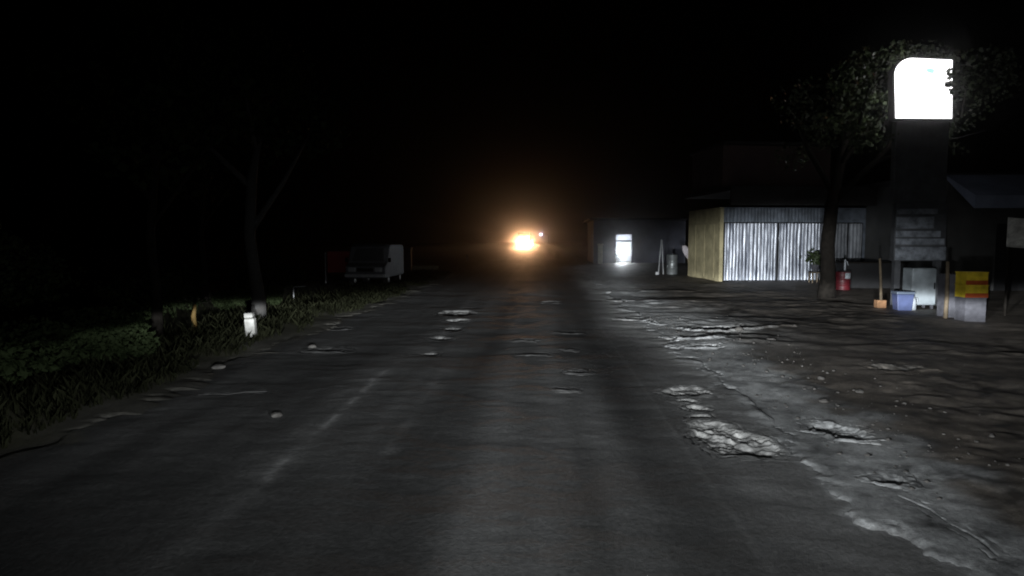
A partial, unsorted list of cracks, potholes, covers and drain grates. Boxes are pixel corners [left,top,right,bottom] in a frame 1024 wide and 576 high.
pothole [559,368,597,376]
pothole [794,417,887,445]
pothole [854,468,933,491]
pothole [684,413,721,421]
pothole [859,362,944,374]
pothole [653,385,725,398]
pothole [299,346,359,354]
pothole [676,418,793,462]
